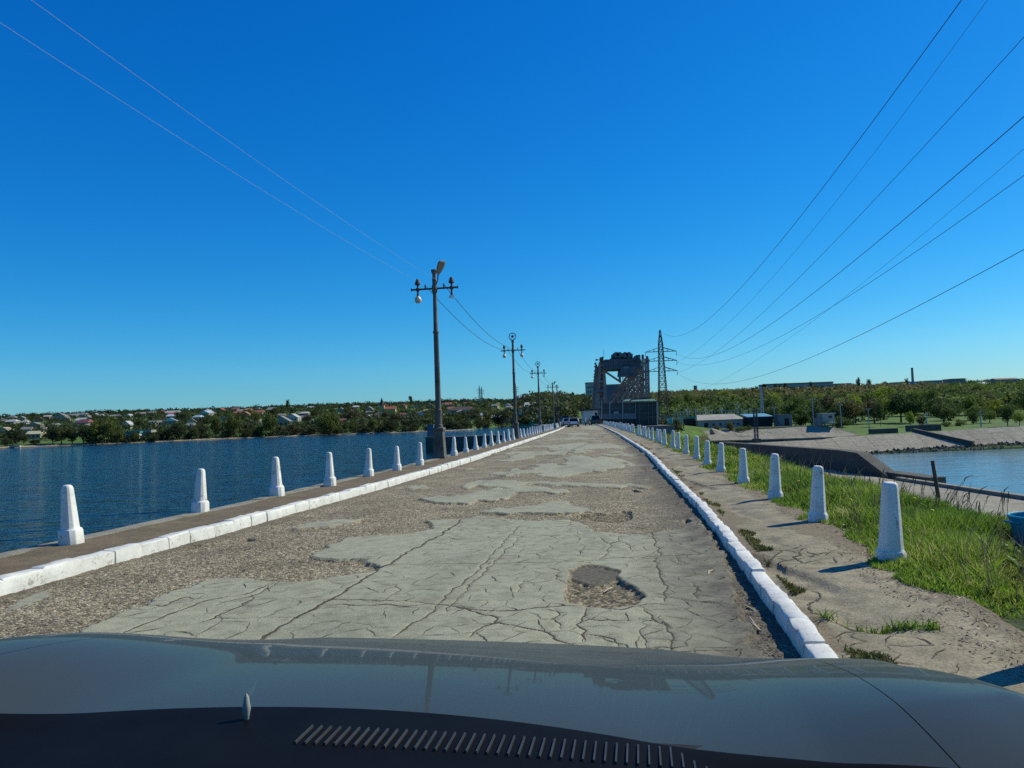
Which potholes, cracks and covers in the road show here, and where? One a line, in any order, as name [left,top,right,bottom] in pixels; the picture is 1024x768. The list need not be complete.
pothole [558,564,651,609]
crack [807,590,960,673]
crack [117,517,742,657]
crack [760,542,858,572]
pothole [566,510,635,523]
